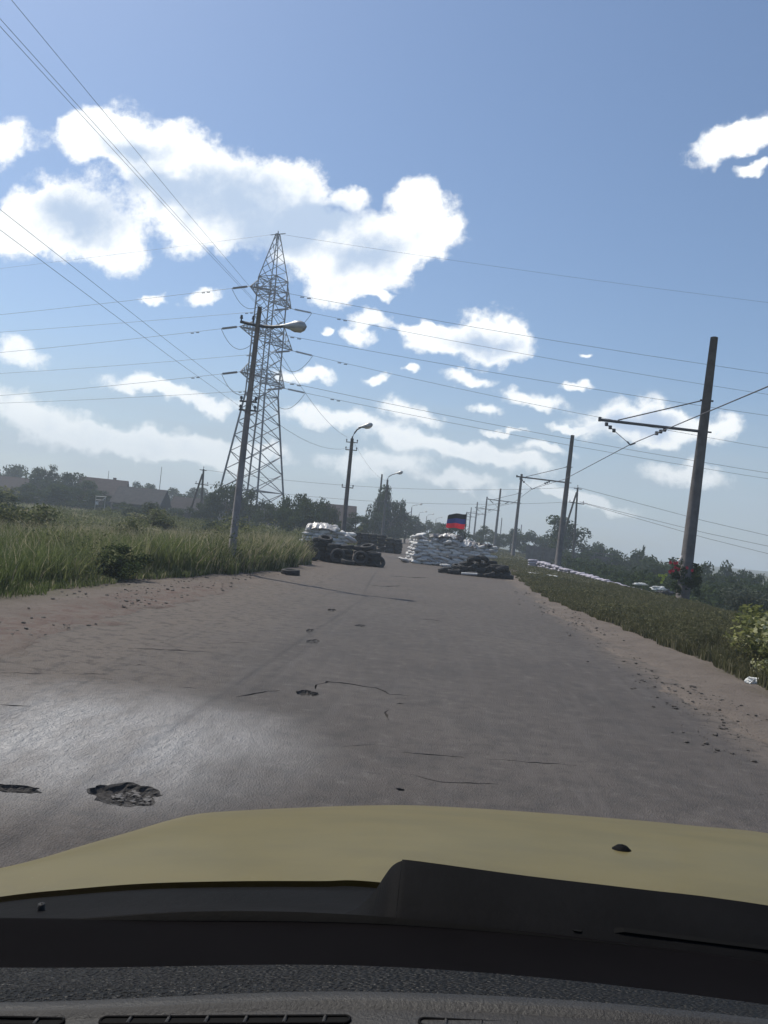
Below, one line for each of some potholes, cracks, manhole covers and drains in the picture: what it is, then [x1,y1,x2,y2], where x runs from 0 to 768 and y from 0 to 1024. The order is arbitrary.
crack [315,681,408,720]
pothole [87,782,163,807]
crack [412,774,492,784]
pothole [0,784,42,794]
